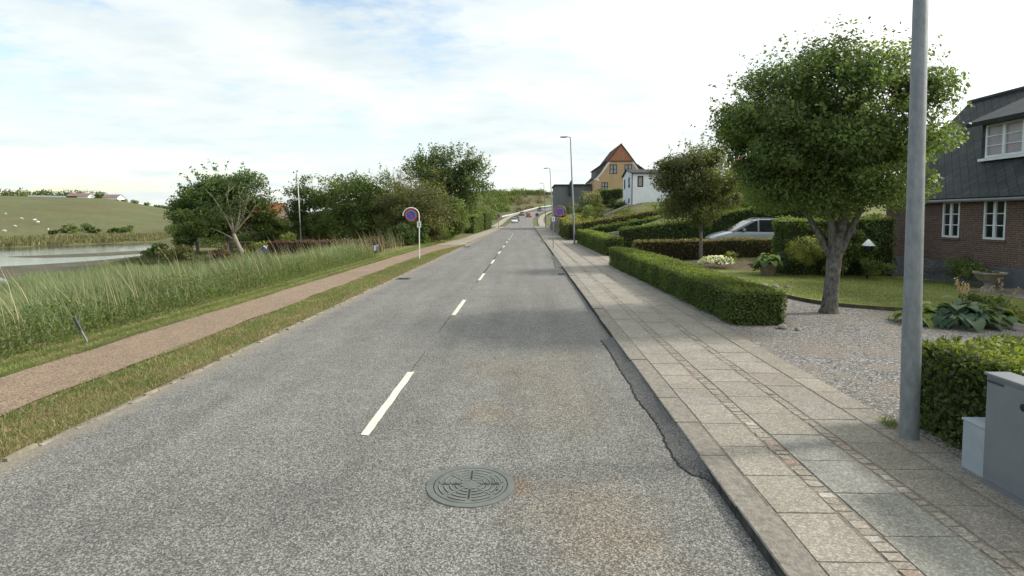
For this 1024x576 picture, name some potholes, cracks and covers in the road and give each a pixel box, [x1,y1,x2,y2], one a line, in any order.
manhole cover [426,465,514,508]
